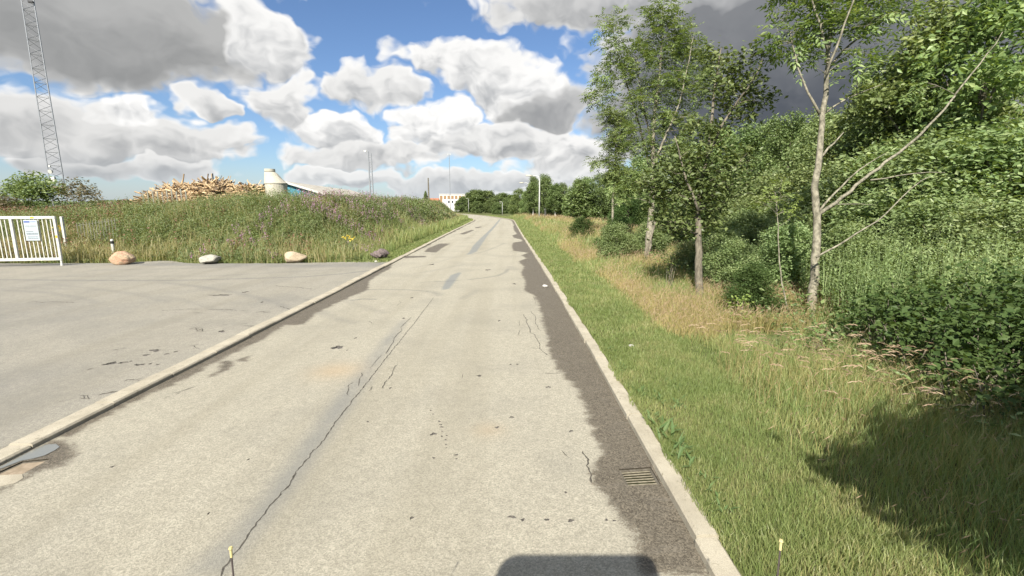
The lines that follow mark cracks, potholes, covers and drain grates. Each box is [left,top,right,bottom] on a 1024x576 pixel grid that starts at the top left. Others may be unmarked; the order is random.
drain grate [619,467,660,486]
crack [562,451,592,483]
crack [220,300,432,576]
